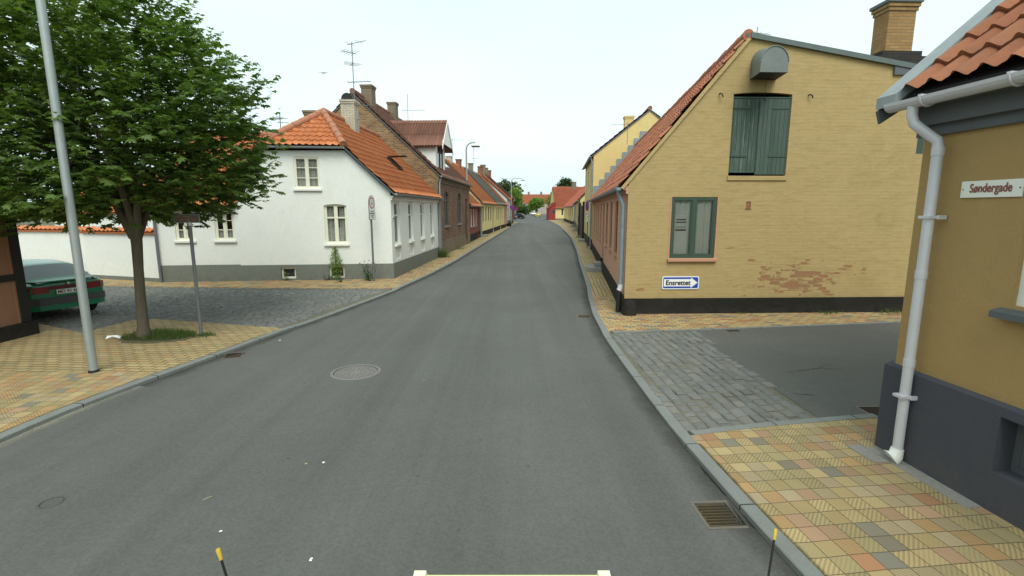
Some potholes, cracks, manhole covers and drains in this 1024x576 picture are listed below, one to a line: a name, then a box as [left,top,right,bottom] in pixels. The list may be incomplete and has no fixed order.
drain grate [689,500,749,530]
utility cover [35,495,69,510]
manhole cover [330,364,381,380]
